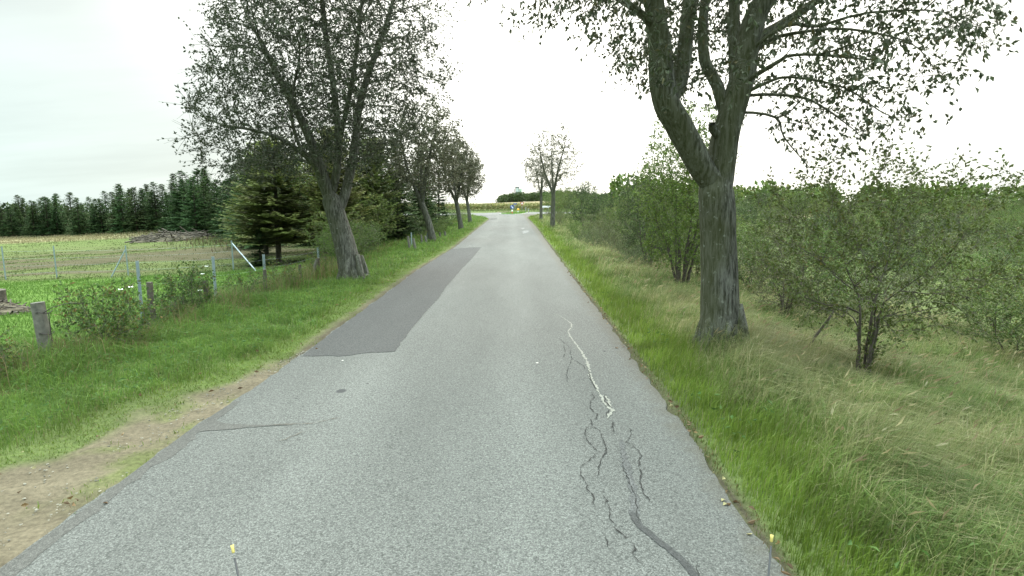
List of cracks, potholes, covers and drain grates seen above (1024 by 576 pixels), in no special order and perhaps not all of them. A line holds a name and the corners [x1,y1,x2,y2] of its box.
crack [559,317,700,576]
